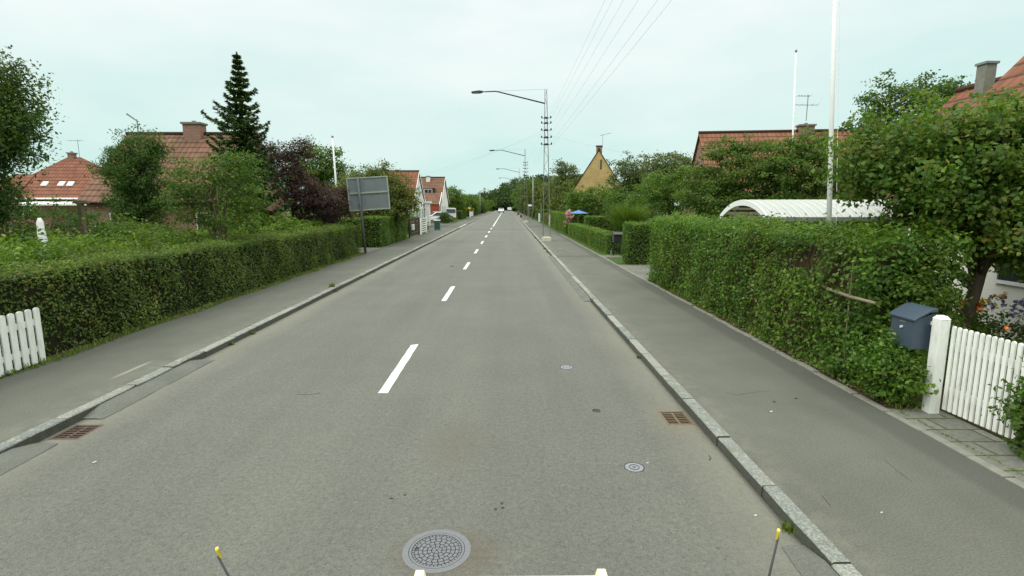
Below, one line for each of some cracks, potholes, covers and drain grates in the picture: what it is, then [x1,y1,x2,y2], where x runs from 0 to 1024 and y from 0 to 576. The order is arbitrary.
drain grate [47,425,103,440]
manhole cover [402,529,471,573]
manhole cover [624,463,645,472]
drain grate [658,411,695,425]
